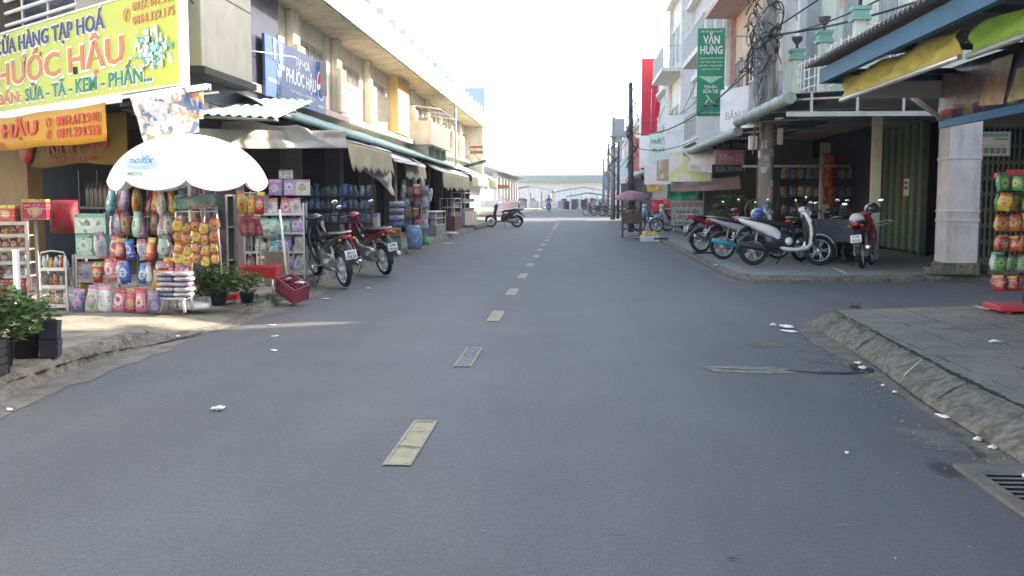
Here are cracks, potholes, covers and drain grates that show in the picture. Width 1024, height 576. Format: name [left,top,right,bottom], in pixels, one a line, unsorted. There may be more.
drain grate [953,464,1024,518]
